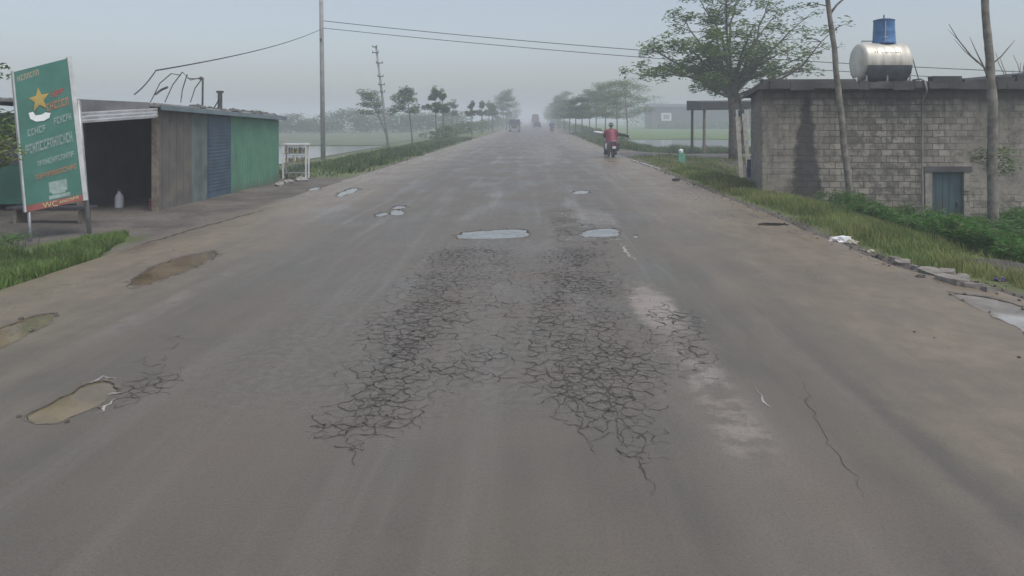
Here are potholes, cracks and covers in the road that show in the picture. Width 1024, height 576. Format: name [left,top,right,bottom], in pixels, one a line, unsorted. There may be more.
crack [518,208,678,495]
pothole [16,378,122,424]
crack [305,245,545,465]
crack [640,300,721,380]
crack [803,383,864,497]
pothole [335,187,359,197]
pothole [450,228,532,239]
pothole [0,312,60,349]
pothole [947,291,1024,333]
pothole [578,227,623,237]
crack [91,335,193,413]
pothole [124,250,223,289]
